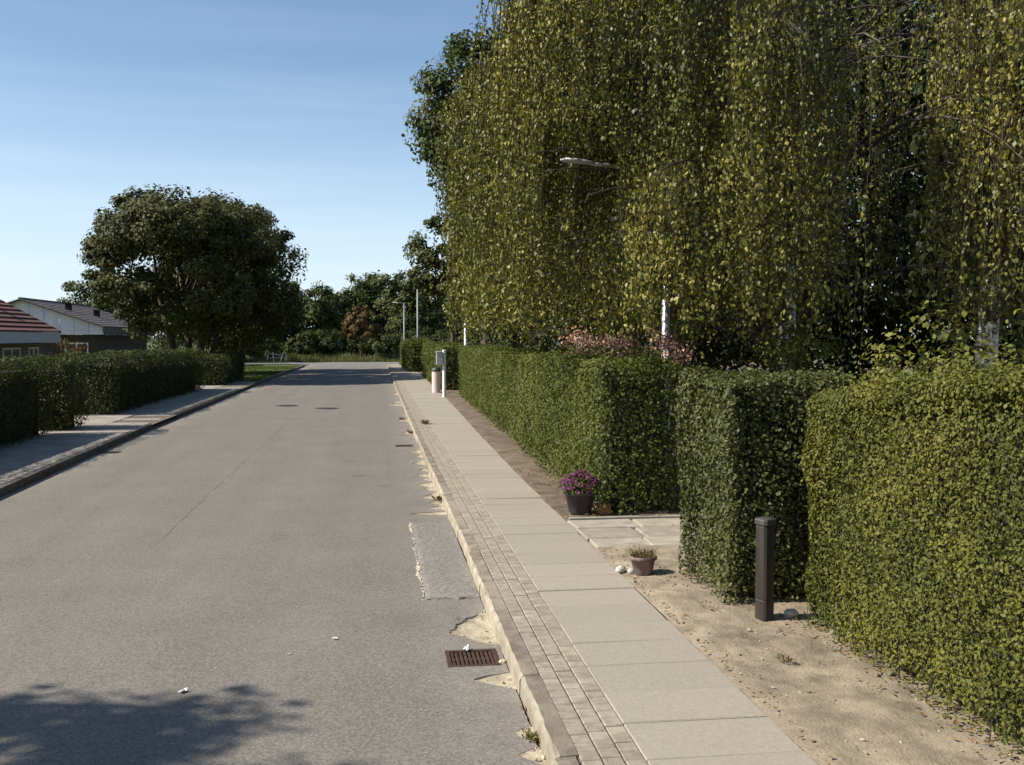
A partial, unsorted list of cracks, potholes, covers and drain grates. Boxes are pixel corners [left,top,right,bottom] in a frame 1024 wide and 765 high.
drain grate [445,648,501,667]
crack [164,427,283,538]
pothole [474,671,517,689]
pothole [450,609,499,645]
